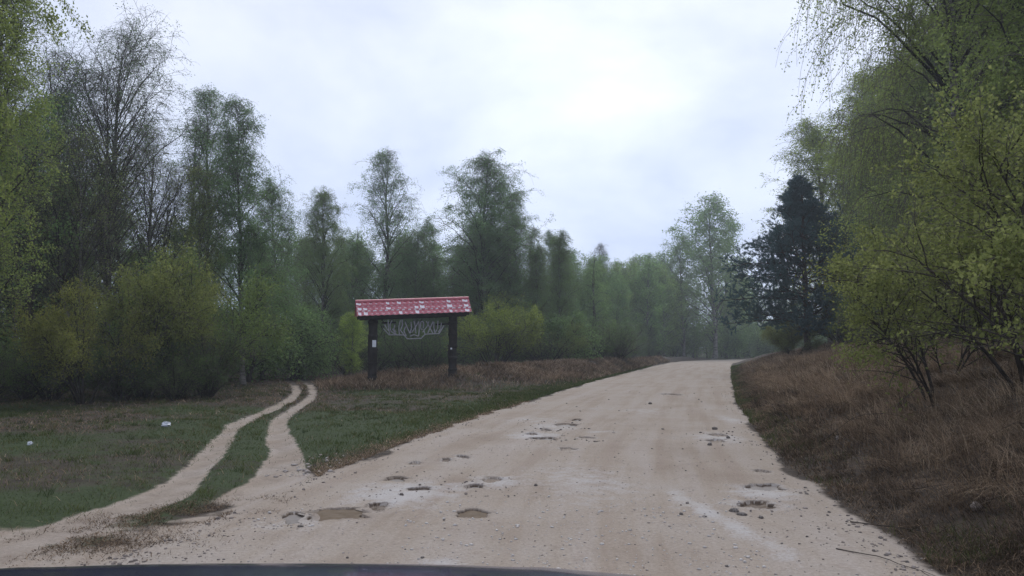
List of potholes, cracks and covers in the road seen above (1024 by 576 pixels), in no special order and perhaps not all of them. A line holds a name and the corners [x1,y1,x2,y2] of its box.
pothole [277,511,320,526]
pothole [298,507,373,523]
pothole [740,483,791,493]
pothole [451,508,495,520]
pothole [355,502,393,513]
pothole [478,476,507,484]
pothole [380,475,413,483]
pothole [733,500,781,511]
